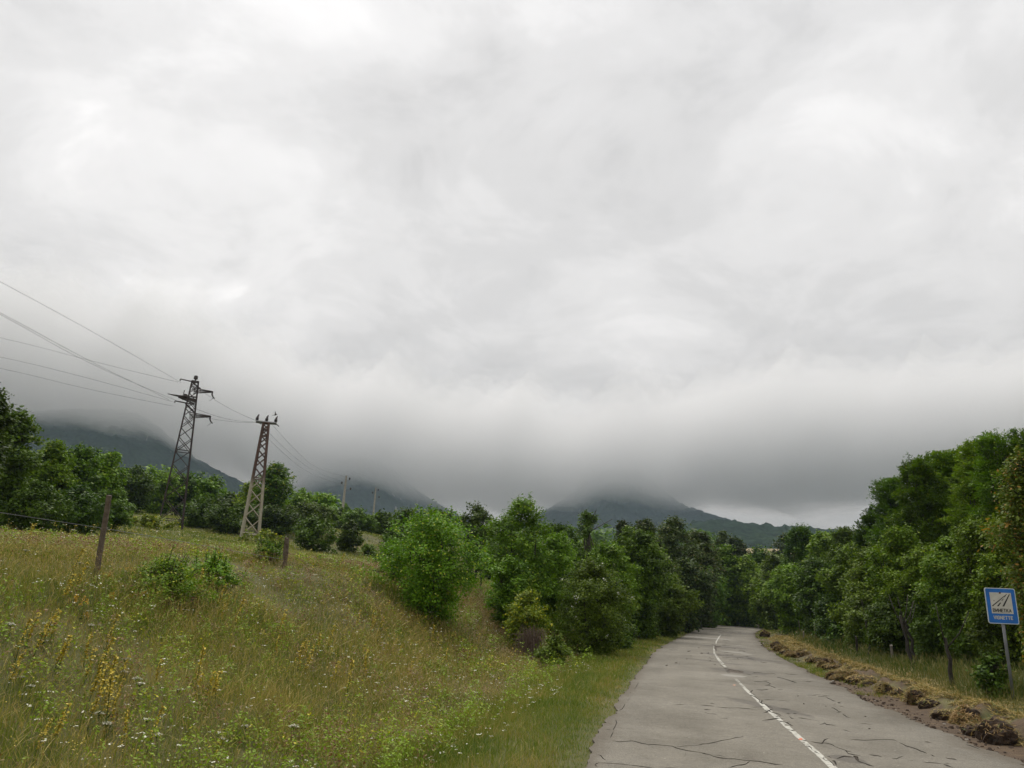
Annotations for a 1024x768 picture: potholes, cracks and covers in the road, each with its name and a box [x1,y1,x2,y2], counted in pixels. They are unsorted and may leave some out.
crack [679,631,978,768]
crack [590,682,780,768]
